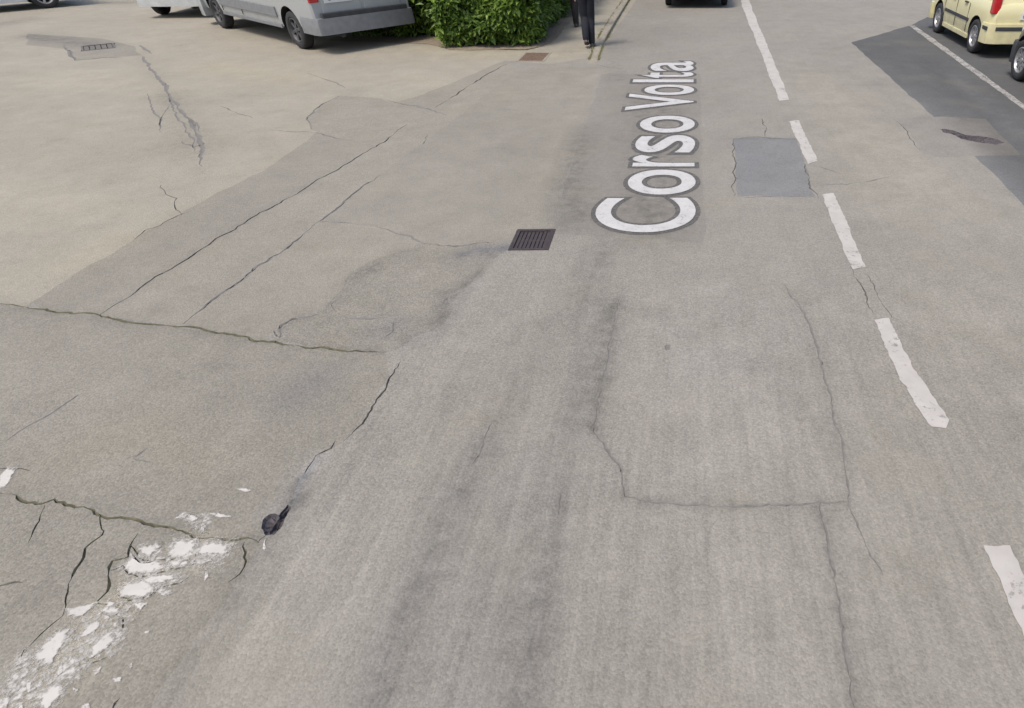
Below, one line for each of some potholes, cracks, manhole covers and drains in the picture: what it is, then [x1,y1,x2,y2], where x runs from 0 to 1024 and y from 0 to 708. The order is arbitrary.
pothole [261,505,291,535]
crack [135,186,187,239]
drain grate [81,43,116,51]
manhole cover [516,52,552,62]
crack [593,269,892,708]
drain grate [508,229,556,251]
crack [0,298,401,474]
crack [63,45,252,166]
pothole [941,129,1004,145]
crack [0,493,266,666]
